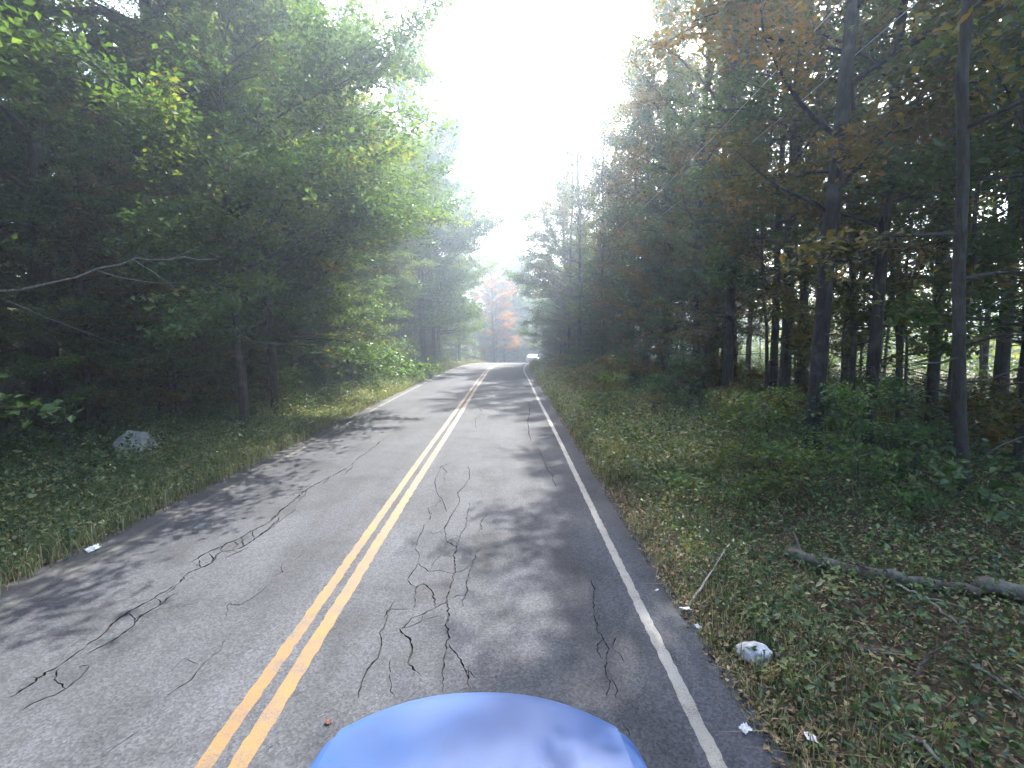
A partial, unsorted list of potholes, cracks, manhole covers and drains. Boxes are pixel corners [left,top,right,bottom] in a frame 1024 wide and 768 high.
crack [591,580,624,701]
crack [358,463,476,700]
crack [8,440,382,714]
